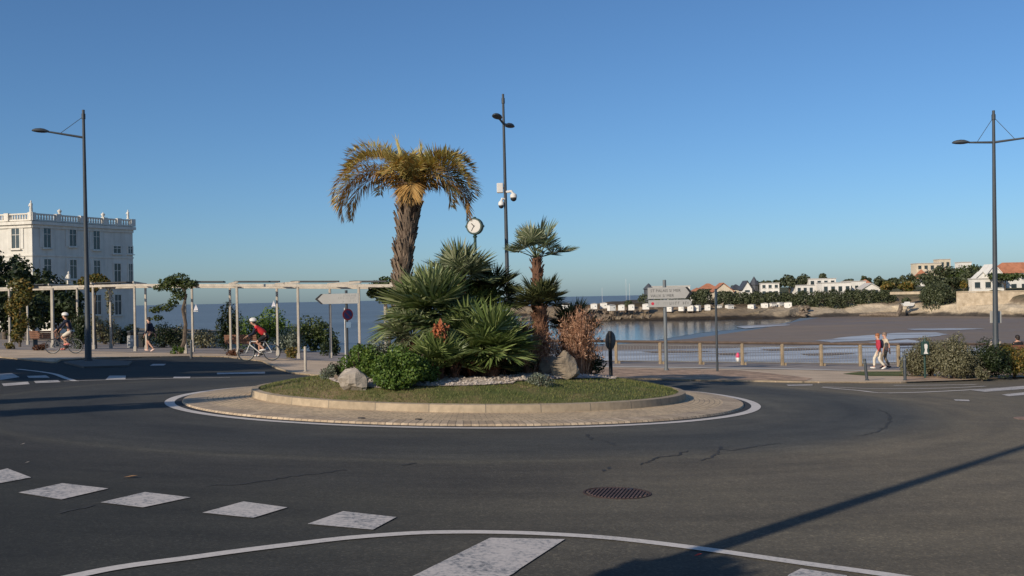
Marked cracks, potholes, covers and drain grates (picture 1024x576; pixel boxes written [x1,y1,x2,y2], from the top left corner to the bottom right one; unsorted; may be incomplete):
crack [857,409,892,436]
manhole cover [583,487,651,499]
crack [640,443,777,465]
